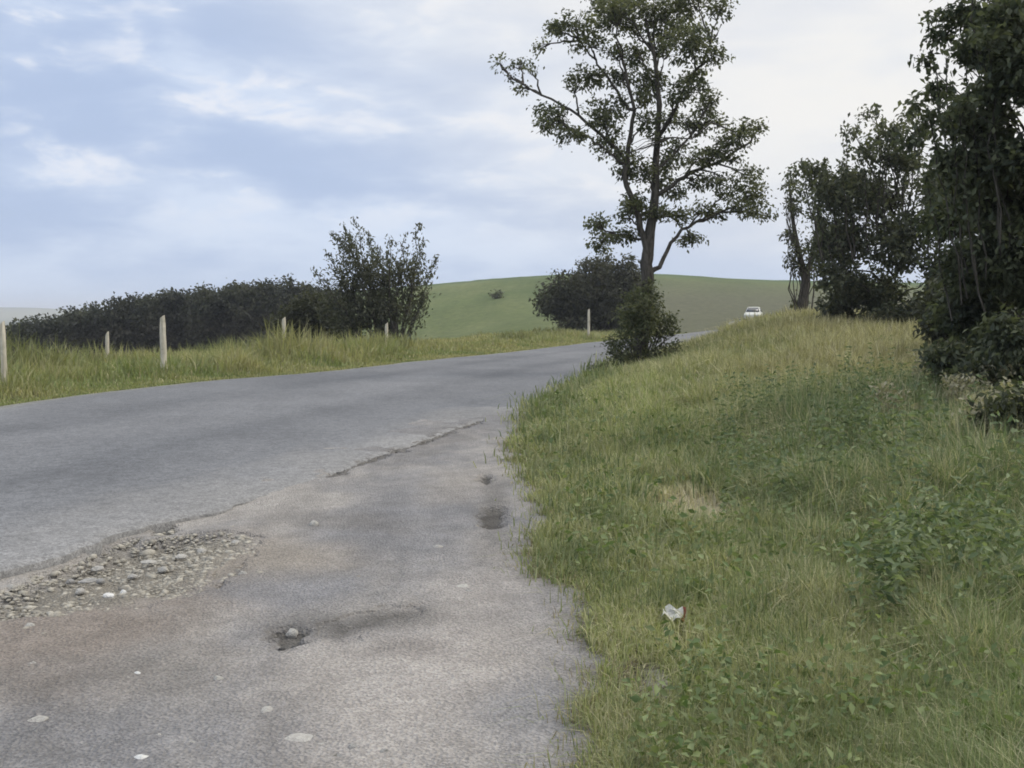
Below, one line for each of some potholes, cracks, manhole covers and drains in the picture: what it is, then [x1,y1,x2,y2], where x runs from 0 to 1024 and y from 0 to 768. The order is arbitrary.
pothole [475,474,495,485]
crack [328,421,481,477]
pothole [265,628,324,650]
pothole [0,531,264,621]
pothole [475,507,510,530]
